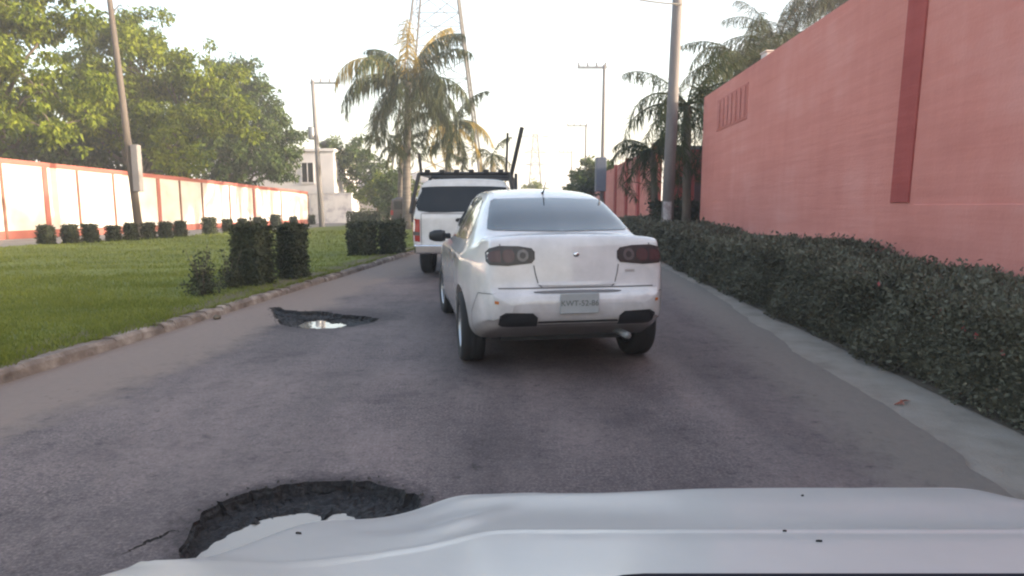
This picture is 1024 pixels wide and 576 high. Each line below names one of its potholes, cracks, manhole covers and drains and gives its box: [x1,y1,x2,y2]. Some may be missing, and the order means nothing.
crack [122,530,176,554]
pothole [267,306,381,329]
pothole [178,475,434,559]
